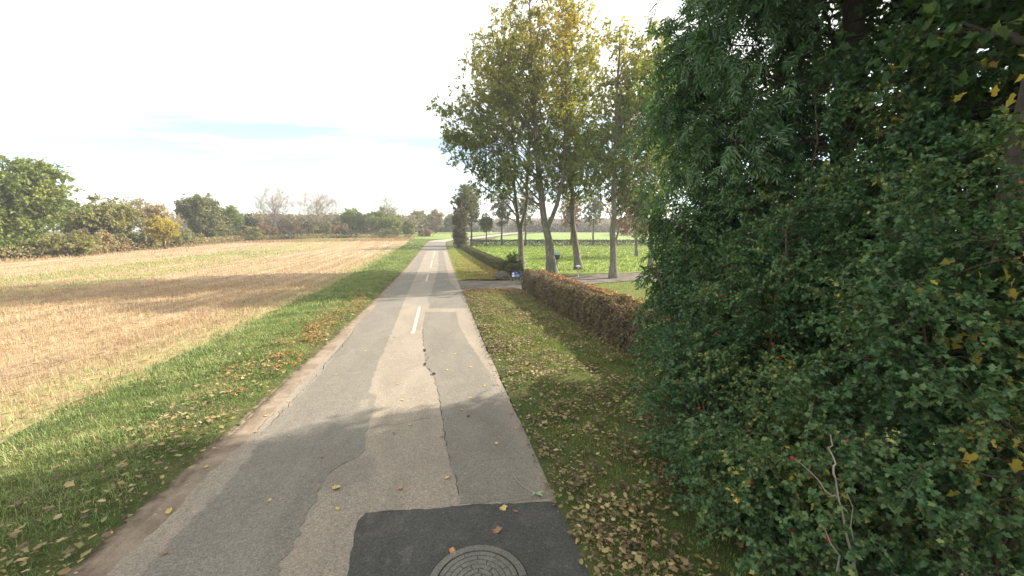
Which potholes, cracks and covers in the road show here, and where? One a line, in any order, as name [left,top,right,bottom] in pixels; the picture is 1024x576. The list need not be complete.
manhole cover [430,545,527,576]
crack [372,330,460,500]
